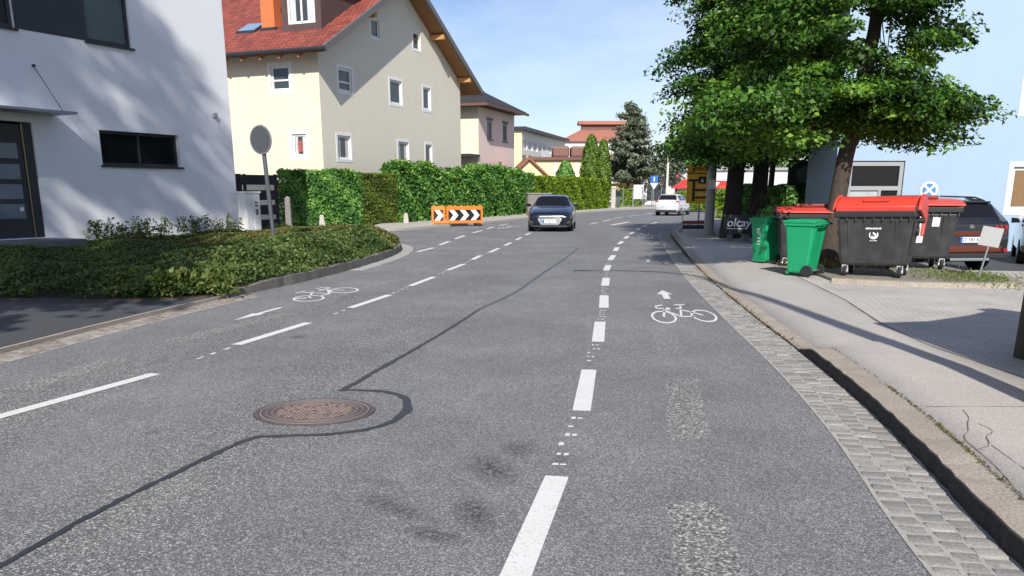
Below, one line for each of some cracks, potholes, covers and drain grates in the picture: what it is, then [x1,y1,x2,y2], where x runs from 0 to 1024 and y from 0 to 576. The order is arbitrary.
crack [963,410,1024,495]
manhole cover [253,398,375,426]
